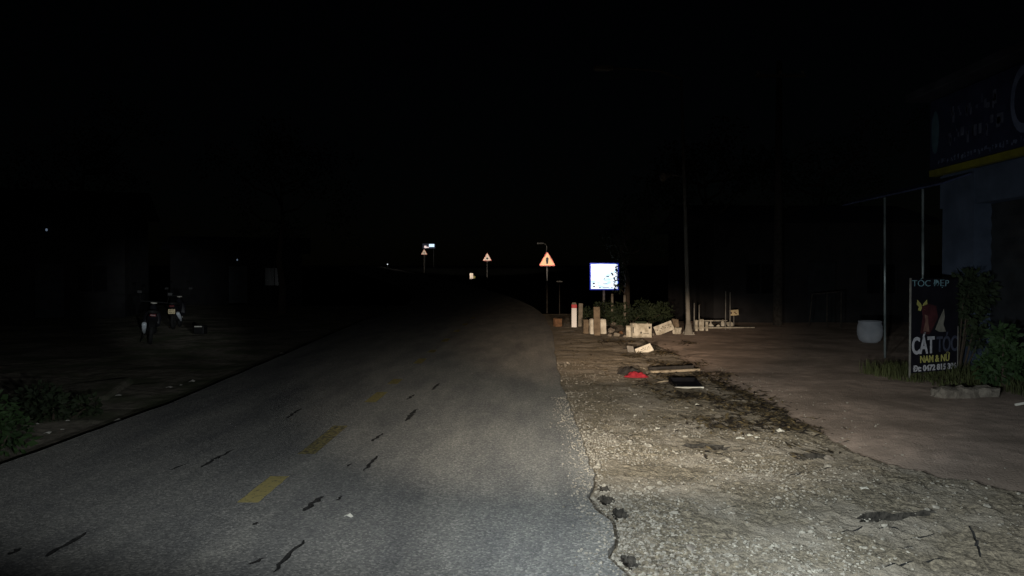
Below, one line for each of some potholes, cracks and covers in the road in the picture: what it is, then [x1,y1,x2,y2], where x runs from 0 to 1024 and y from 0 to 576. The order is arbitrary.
pothole [597,495,615,505]
crack [302,496,343,511]
crack [171,449,234,470]
pothole [854,509,938,522]
crack [345,433,383,471]
crack [405,395,417,421]
crack [44,532,87,557]
crack [968,526,981,557]
crack [249,522,305,572]
pothole [619,555,641,570]
pothole [611,507,629,520]
